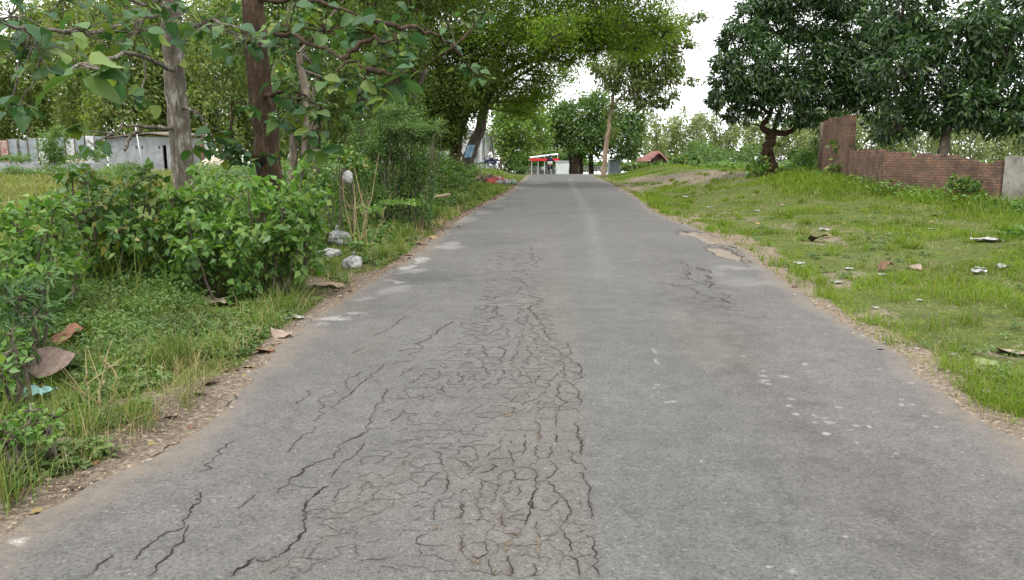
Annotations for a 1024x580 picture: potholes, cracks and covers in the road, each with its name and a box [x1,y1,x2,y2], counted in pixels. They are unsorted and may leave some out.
crack [229,239,599,579]
crack [133,492,202,576]
